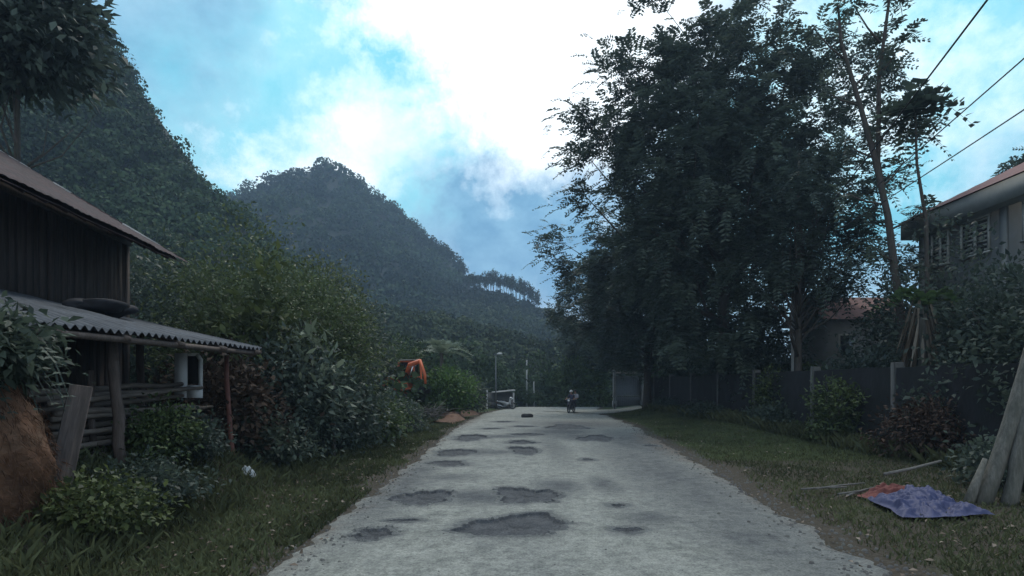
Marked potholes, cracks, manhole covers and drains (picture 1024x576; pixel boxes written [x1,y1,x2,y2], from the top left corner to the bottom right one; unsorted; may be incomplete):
pothole [490,486,567,505]
pothole [380,489,458,507]
pothole [570,434,618,442]
pothole [441,510,575,538]
pothole [604,526,653,535]
pothole [505,446,543,455]
pothole [451,434,493,442]
pothole [433,448,483,457]
pothole [343,525,402,542]
